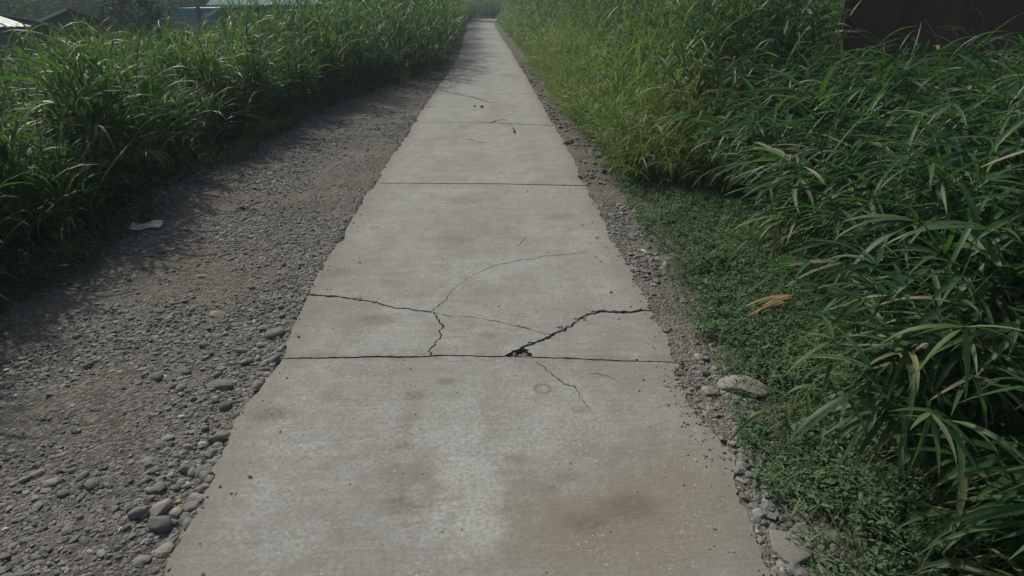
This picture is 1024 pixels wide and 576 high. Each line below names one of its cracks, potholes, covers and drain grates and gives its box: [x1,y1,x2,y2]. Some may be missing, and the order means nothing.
crack [309,237,650,412]
crack [427,90,533,143]
